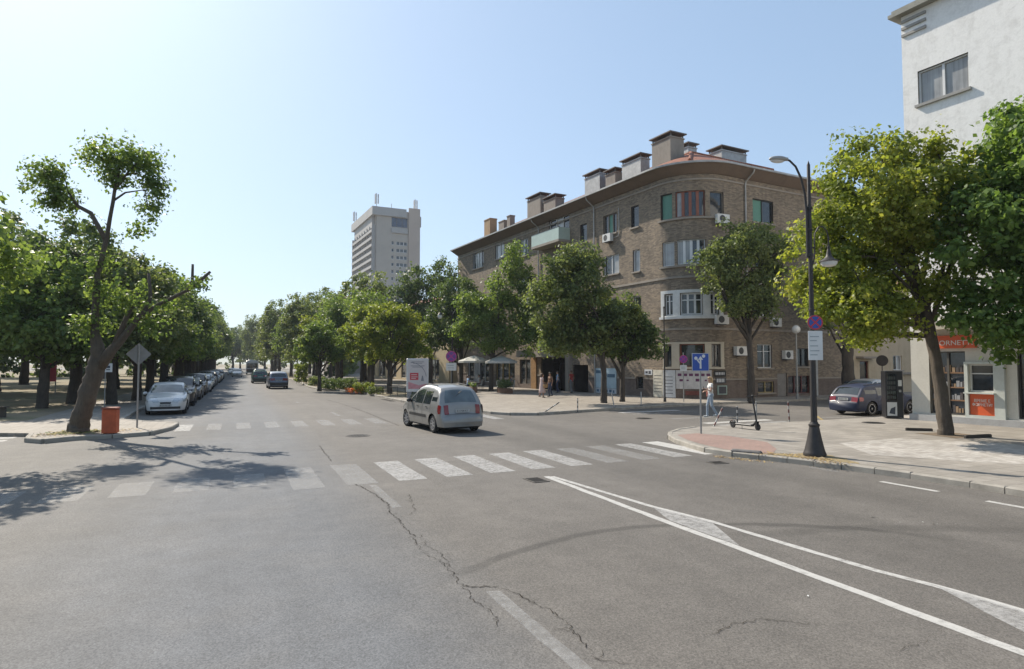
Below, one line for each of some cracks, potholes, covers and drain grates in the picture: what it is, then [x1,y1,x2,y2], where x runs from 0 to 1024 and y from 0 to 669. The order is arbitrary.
crack [356,484,632,664]
